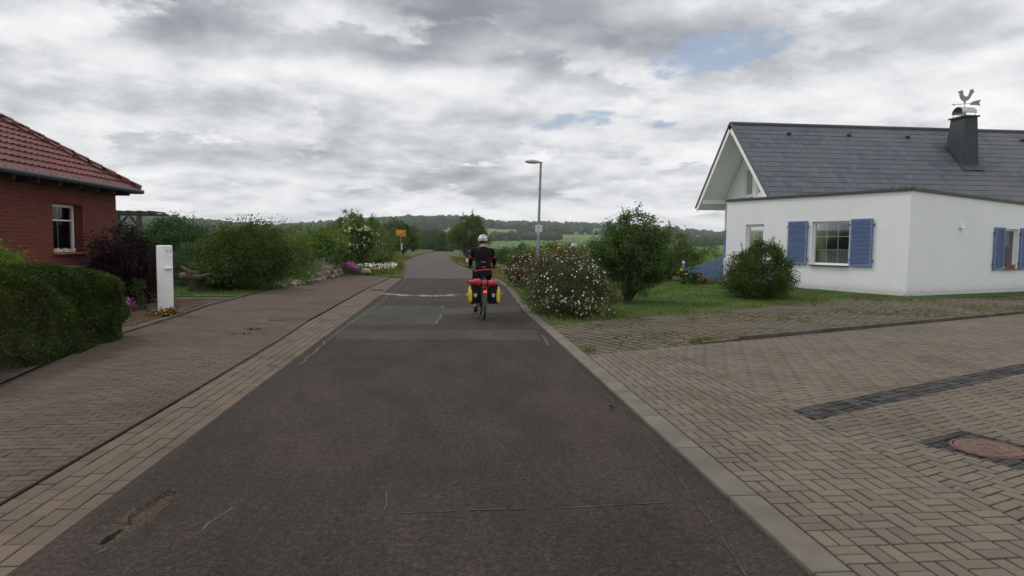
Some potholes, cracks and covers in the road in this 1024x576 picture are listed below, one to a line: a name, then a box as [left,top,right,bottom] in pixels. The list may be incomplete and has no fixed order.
manhole cover [948,438,1024,460]
pothole [99,529,124,547]
